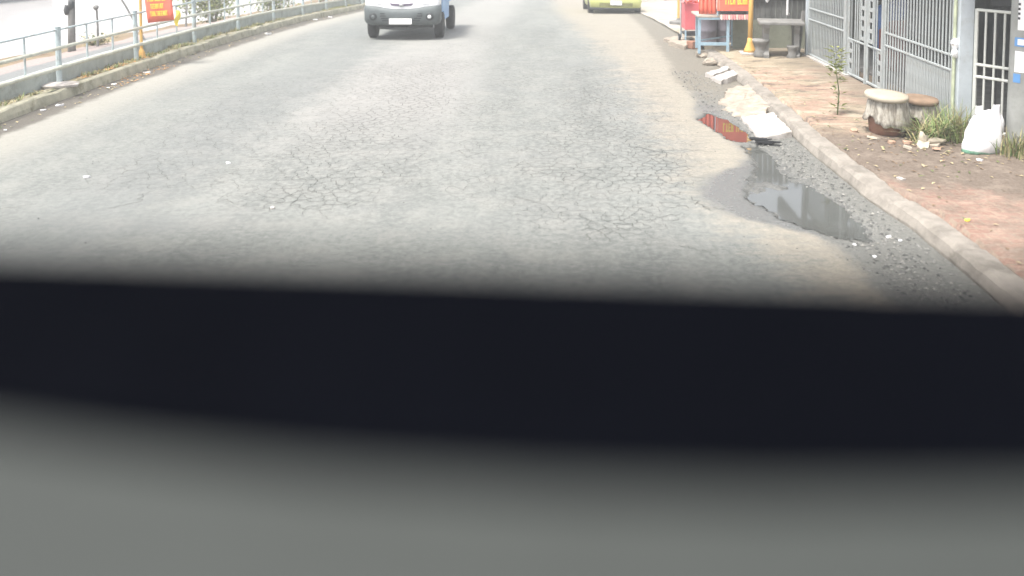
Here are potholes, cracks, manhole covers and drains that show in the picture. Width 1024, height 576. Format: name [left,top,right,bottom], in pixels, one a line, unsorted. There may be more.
pothole [740,144,876,244]
crack [60,75,324,208]
pothole [696,112,753,143]
crack [216,31,578,221]
crack [512,63,715,244]
